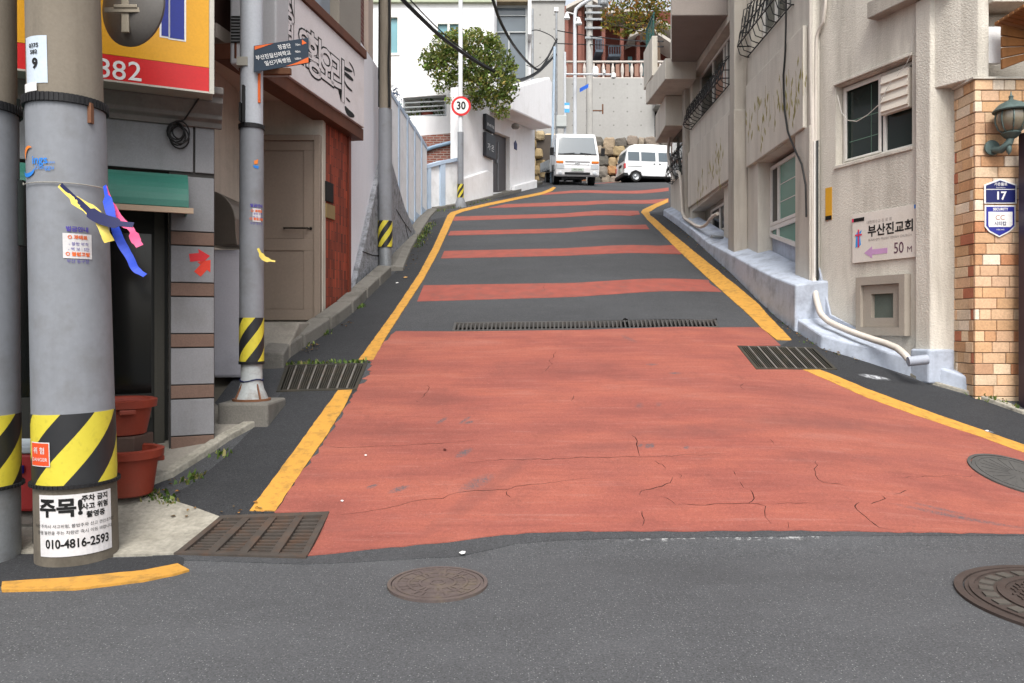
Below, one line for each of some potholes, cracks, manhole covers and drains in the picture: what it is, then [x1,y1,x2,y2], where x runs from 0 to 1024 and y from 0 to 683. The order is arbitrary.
drain grate [276,363,367,392]
manhole cover [387,566,488,603]
manhole cover [967,453,1024,493]
drain grate [174,511,329,559]
drain grate [737,345,837,370]
manhole cover [954,565,1024,627]
